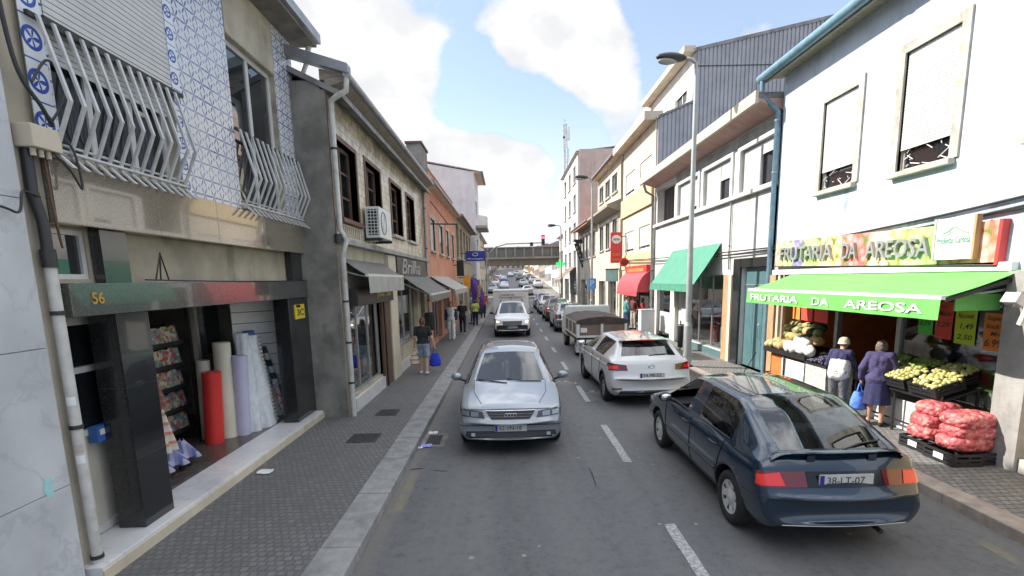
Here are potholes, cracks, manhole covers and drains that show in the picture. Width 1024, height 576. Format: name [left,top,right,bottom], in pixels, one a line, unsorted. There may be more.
drain grate [419,433,449,447]
manhole cover [345,433,382,443]
